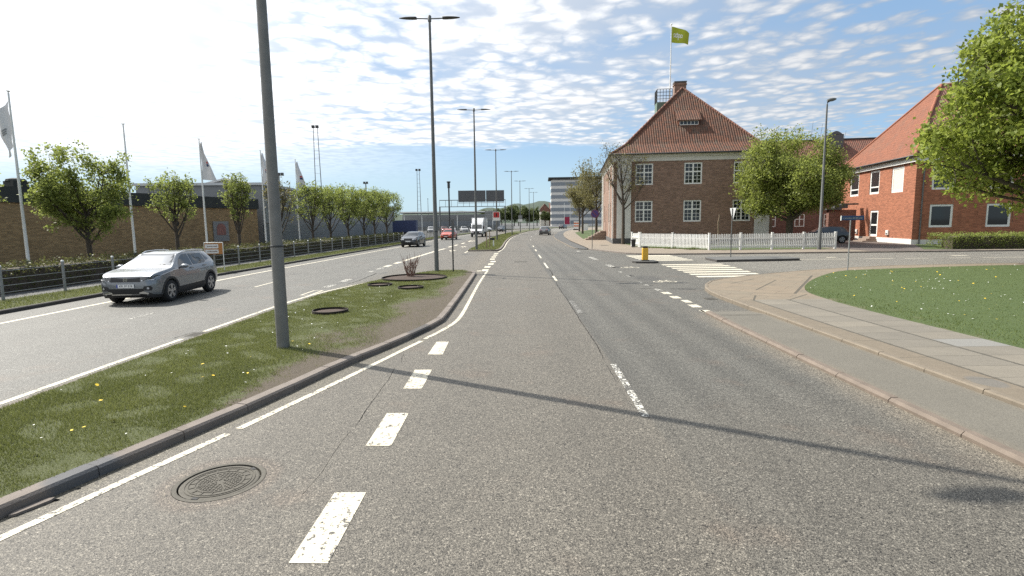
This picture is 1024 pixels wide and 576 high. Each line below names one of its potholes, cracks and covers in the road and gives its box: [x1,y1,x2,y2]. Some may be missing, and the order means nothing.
manhole cover [171,462,266,503]
